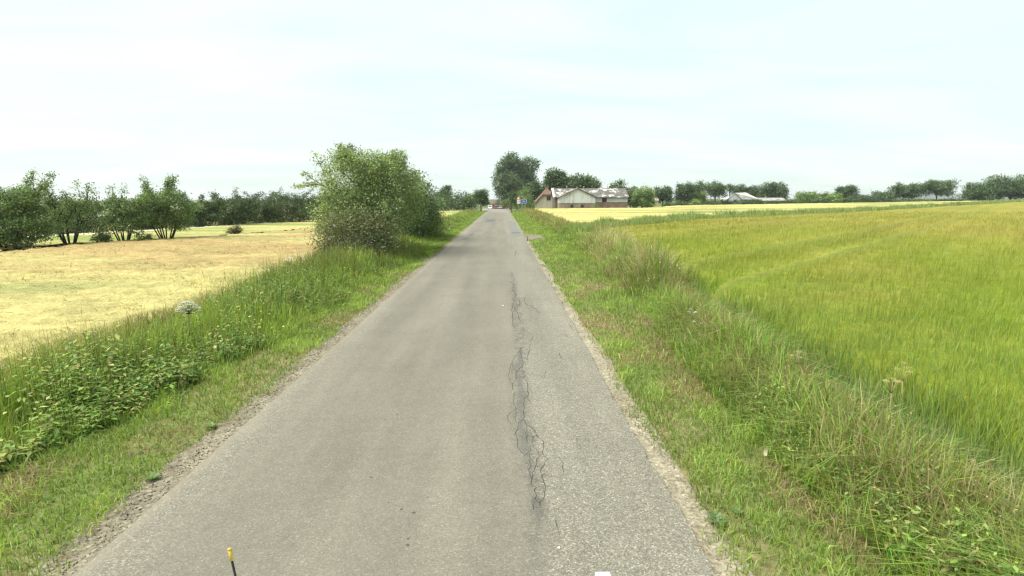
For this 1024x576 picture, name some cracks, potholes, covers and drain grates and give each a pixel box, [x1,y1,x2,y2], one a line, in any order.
crack [511,275,543,327]
crack [507,330,564,538]
